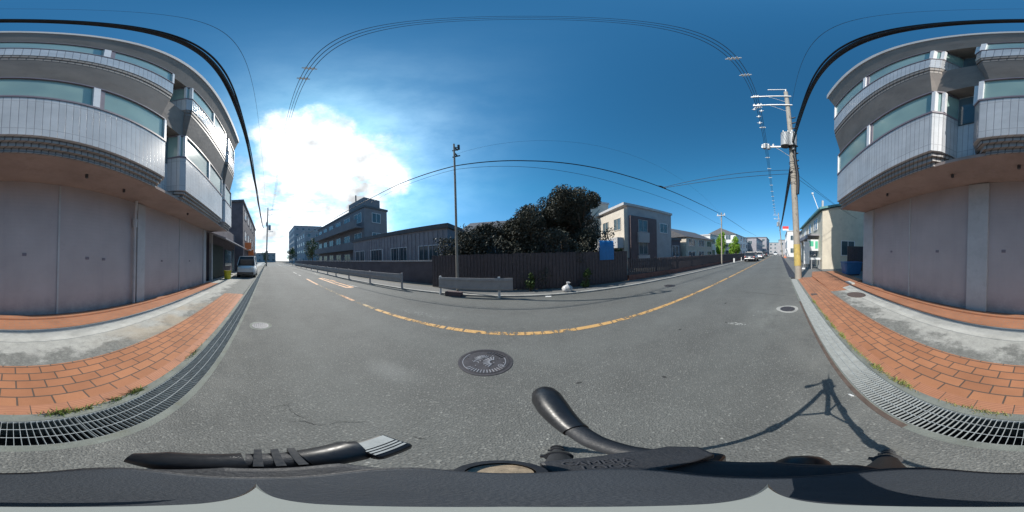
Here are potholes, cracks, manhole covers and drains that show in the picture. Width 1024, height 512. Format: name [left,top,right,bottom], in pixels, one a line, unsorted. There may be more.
drain grate [209,324,237,346]
drain grate [839,362,935,422]
drain grate [75,376,197,437]
drain grate [225,311,244,325]
manhole cover [249,322,272,330]
drain grate [173,344,225,383]
manhole cover [458,349,513,376]
